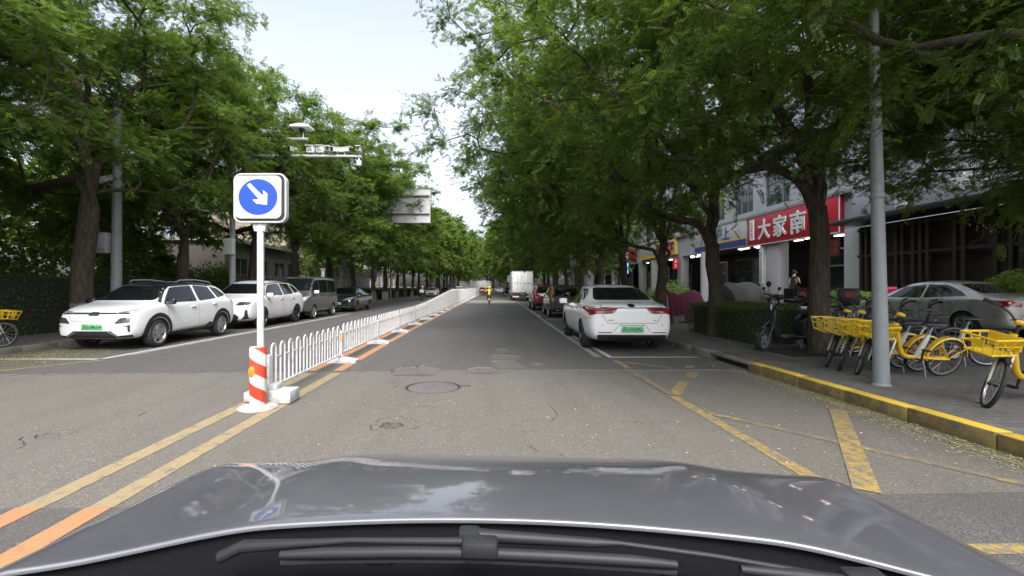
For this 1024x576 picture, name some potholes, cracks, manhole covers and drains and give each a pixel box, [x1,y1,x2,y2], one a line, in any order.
crack [18,412,147,449]
pothole [379,422,404,430]
crack [512,406,564,457]
manhole cover [404,381,471,394]
